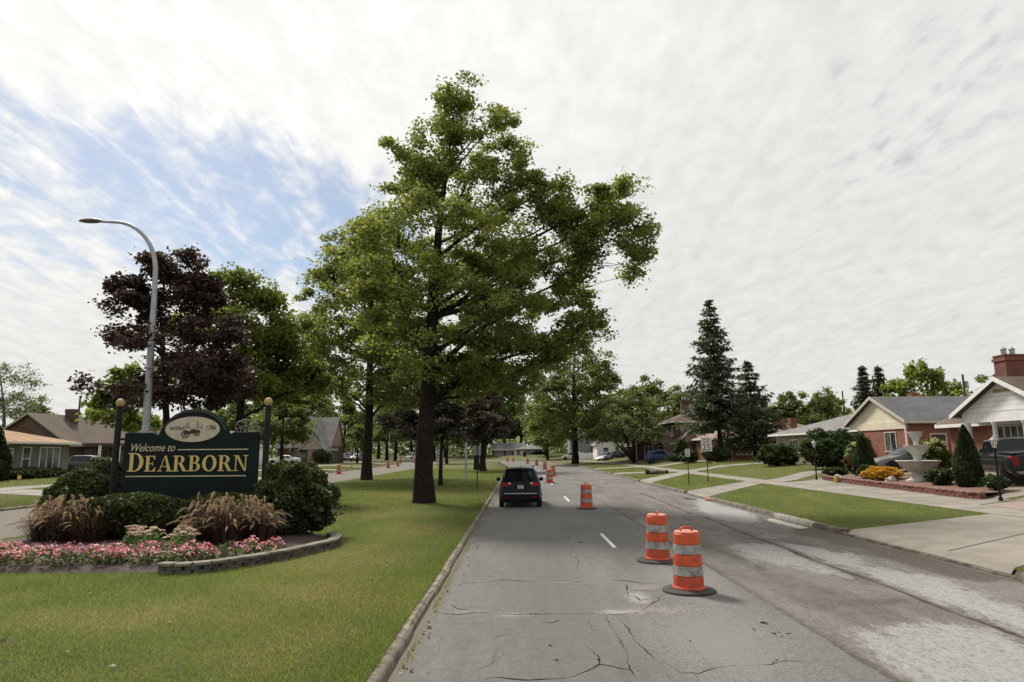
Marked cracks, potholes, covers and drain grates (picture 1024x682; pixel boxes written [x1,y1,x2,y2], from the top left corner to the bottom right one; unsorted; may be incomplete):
crack [463,532,834,681]
